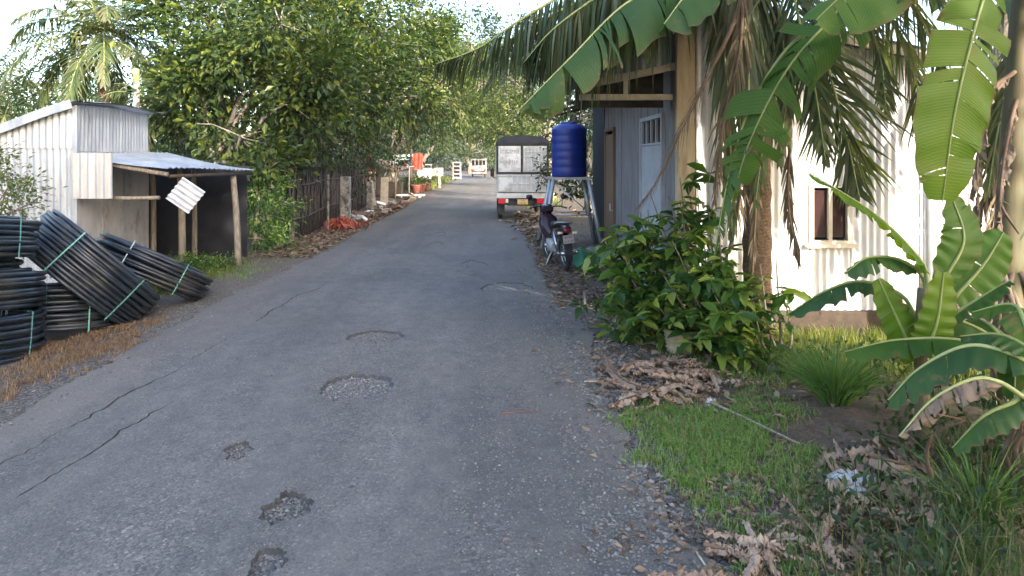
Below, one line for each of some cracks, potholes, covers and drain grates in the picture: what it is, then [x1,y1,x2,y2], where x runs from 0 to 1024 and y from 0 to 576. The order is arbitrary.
pothole [223,441,254,461]
pothole [258,490,315,526]
pothole [247,547,289,576]
crack [0,287,321,498]
pothole [320,374,394,401]
pothole [346,330,405,344]
